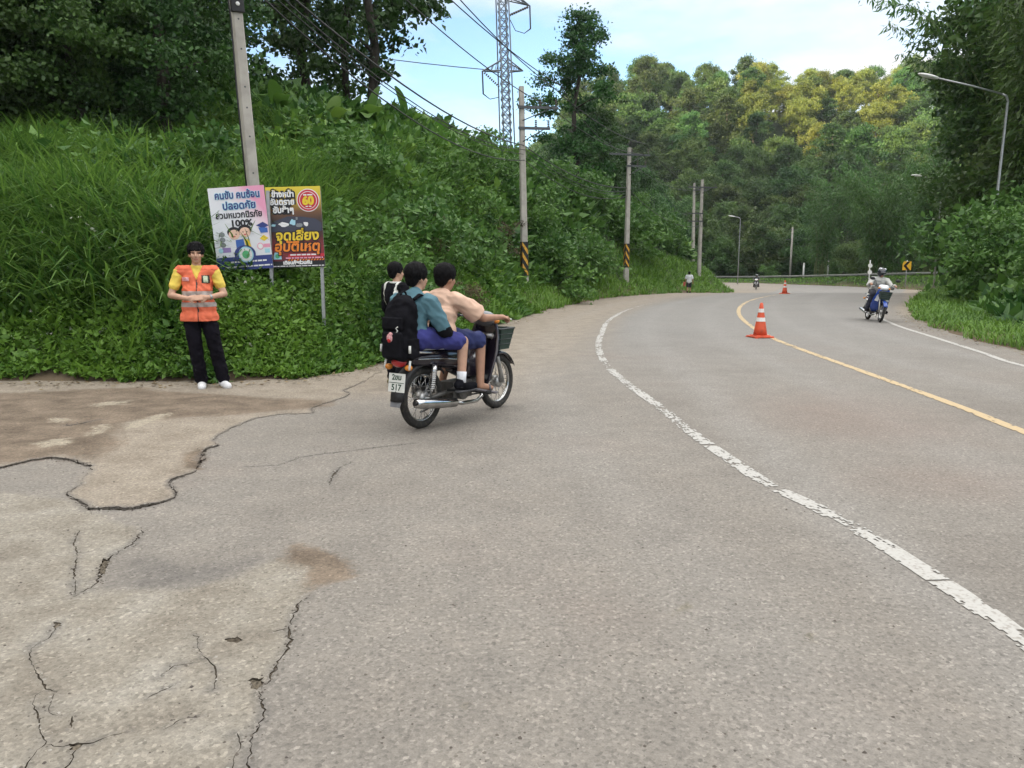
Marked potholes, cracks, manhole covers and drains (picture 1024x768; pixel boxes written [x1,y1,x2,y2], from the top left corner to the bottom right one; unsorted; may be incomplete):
crack [148,635,217,698]
crack [232,599,304,768]
crack [25,629,124,768]
crack [73,530,144,597]
